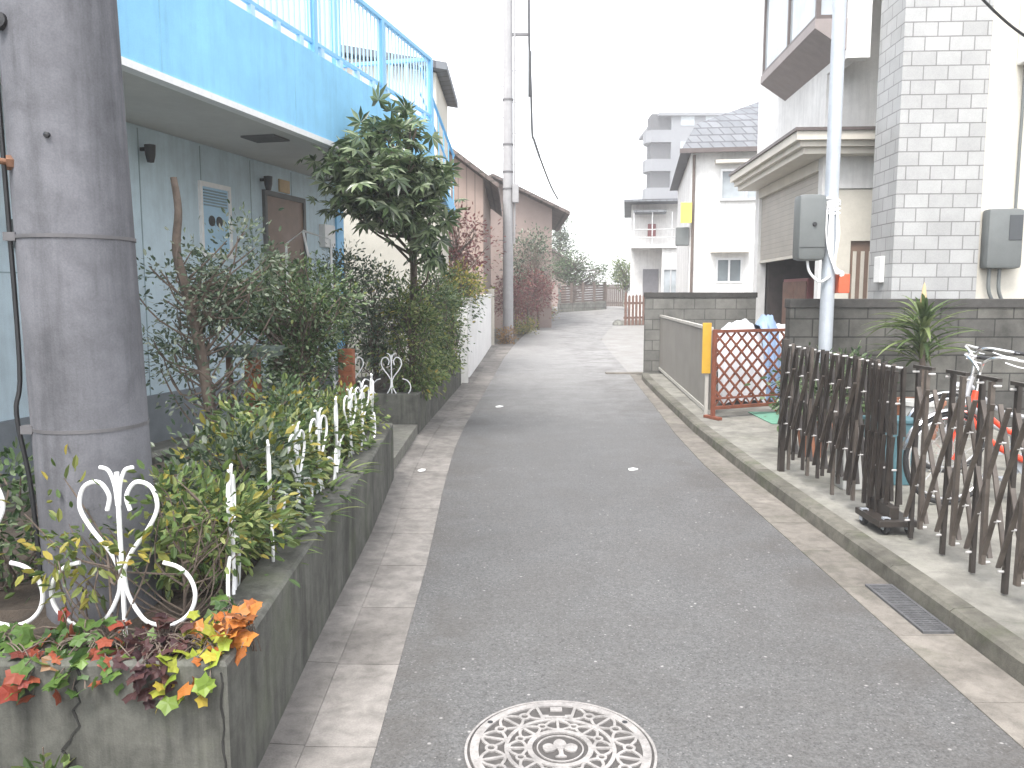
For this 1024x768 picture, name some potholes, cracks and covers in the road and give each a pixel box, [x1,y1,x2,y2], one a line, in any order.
manhole cover [464,700,657,768]
drain grate [865,584,955,634]
